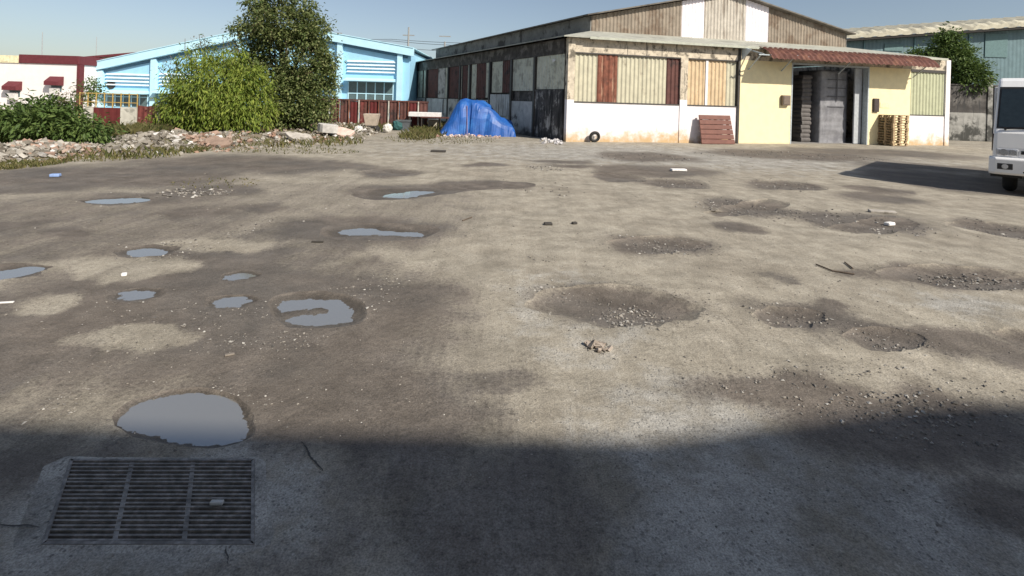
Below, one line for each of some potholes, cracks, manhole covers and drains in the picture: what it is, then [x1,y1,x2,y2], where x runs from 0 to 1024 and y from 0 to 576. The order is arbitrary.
pothole [320,223,440,240]
pothole [112,244,181,258]
pothole [106,287,166,302]
pothole [875,263,1024,291]
pothole [826,217,920,234]
pothole [112,387,256,449]
pothole [351,182,536,200]
pothole [77,196,153,206]
crack [301,441,323,471]
drain grate [13,456,275,555]
pothole [203,294,262,309]
pothole [268,290,367,328]
